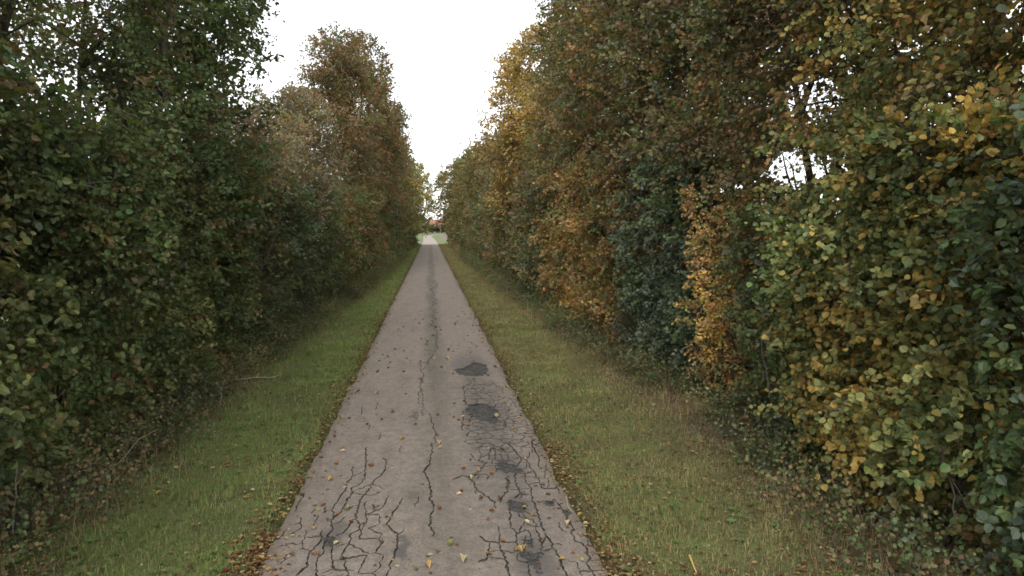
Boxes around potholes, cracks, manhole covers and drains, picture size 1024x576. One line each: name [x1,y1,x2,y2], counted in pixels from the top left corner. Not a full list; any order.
pothole [495,459,524,475]
pothole [463,403,502,423]
pothole [453,362,489,376]
pothole [506,500,528,513]
crack [261,280,599,576]
